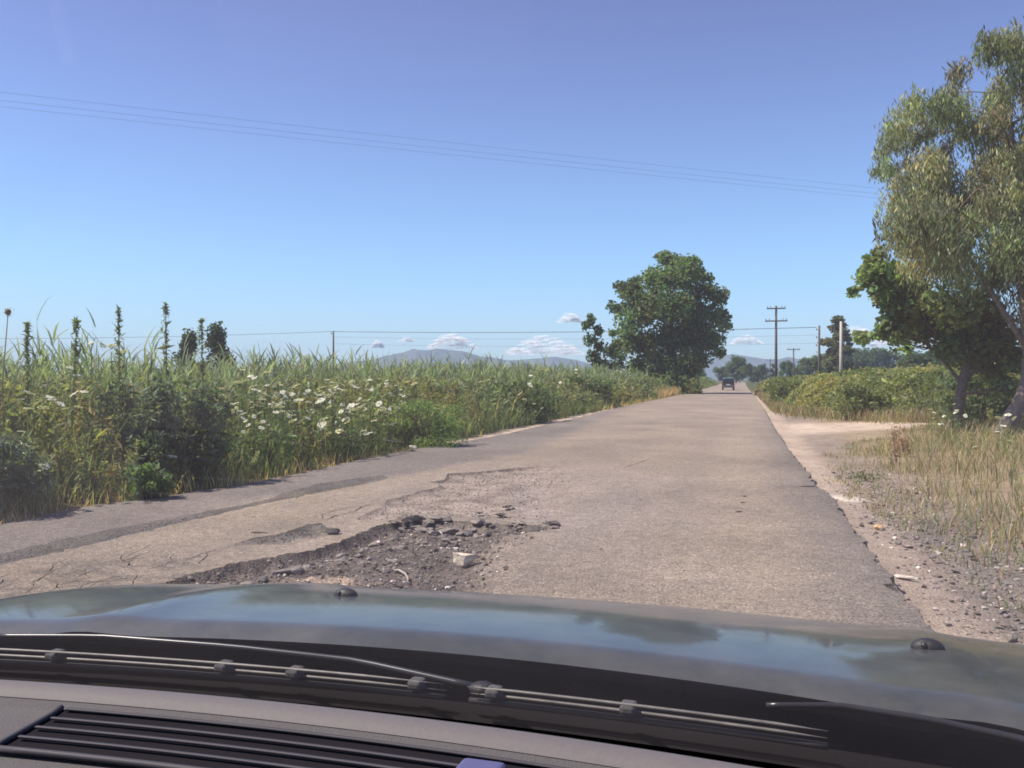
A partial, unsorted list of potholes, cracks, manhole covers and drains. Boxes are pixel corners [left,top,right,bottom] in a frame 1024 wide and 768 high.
crack [0,545,223,595]
pothole [161,521,560,594]
